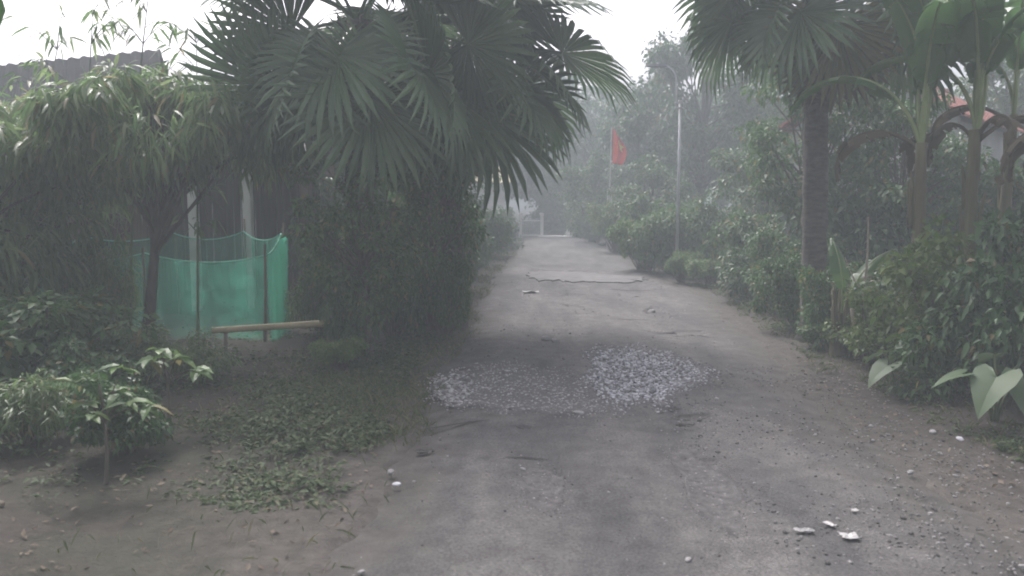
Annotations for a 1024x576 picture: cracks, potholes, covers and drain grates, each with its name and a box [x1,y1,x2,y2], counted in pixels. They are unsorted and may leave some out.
pothole [430,370,472,407]
pothole [587,345,709,406]
pothole [445,365,608,412]
